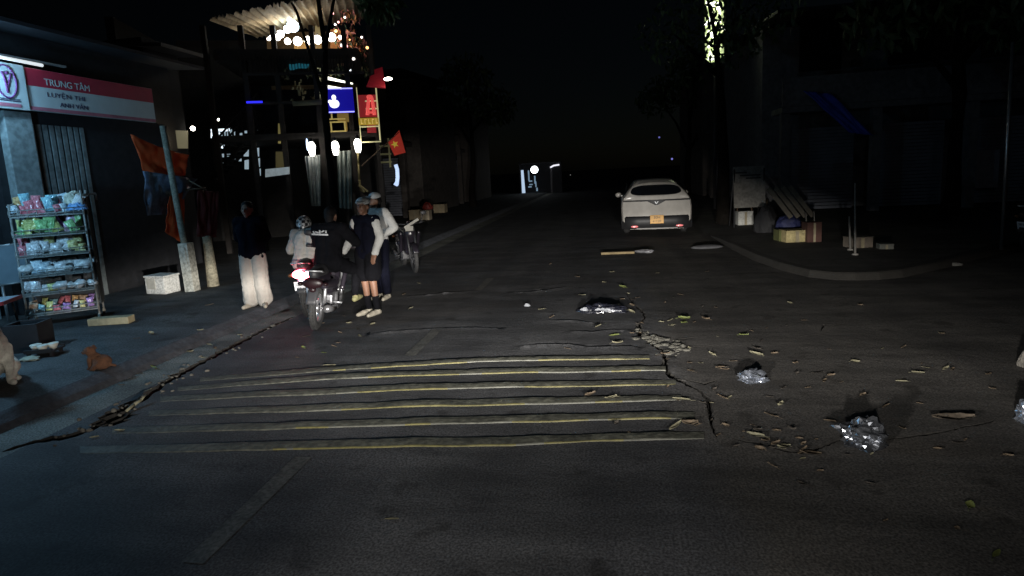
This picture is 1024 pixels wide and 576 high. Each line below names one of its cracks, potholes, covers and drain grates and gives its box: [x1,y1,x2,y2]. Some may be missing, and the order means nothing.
crack [888,419,996,439]
crack [3,317,293,452]
crack [626,293,841,454]
